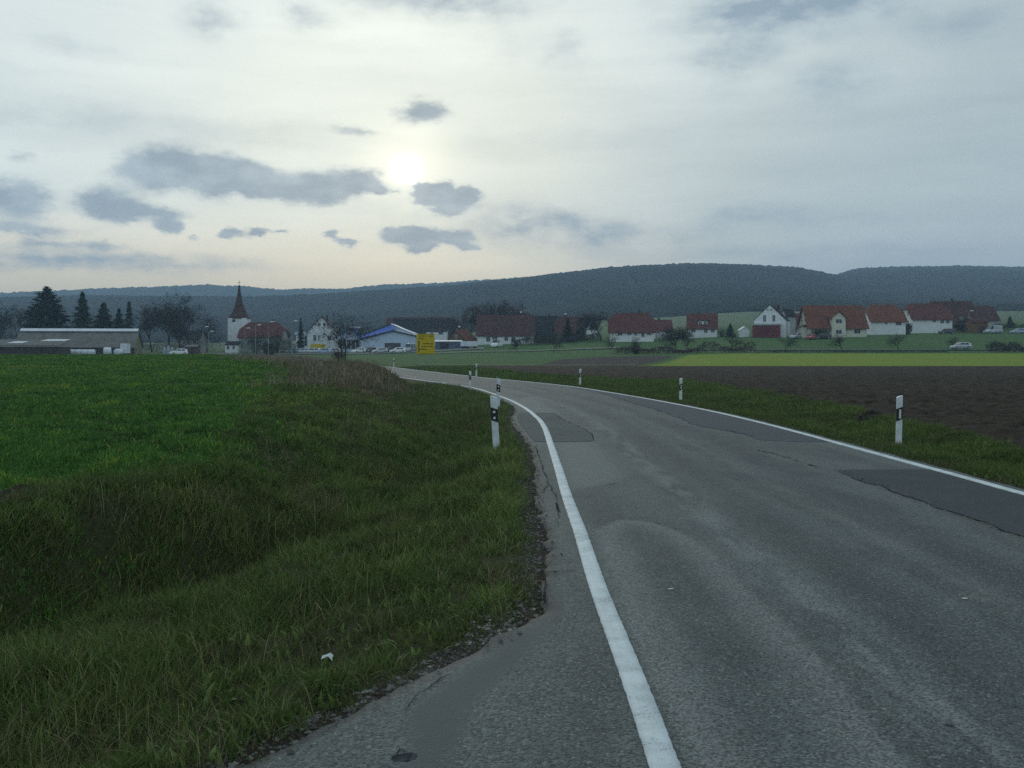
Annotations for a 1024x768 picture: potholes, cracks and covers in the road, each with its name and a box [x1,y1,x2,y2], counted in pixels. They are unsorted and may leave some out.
pothole [391,753,417,762]
crack [536,445,560,525]
